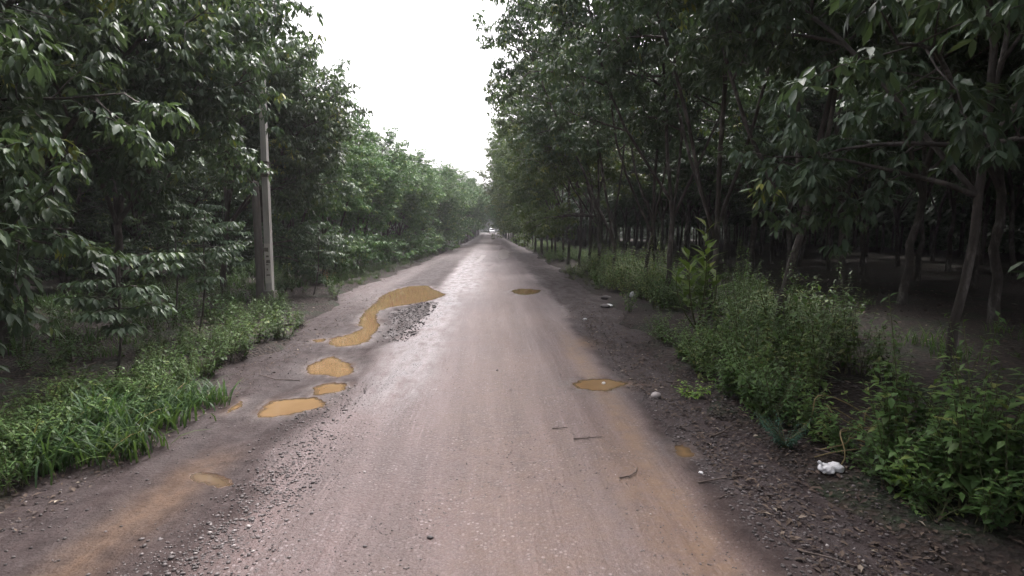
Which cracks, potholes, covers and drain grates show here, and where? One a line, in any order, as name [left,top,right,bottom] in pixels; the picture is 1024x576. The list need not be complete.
pothole [189,472,233,488]
pothole [328,285,446,347]
pothole [312,382,348,395]
pothole [674,444,695,457]
pothole [257,397,326,418]
pothole [572,379,629,391]
pothole [306,356,355,378]
